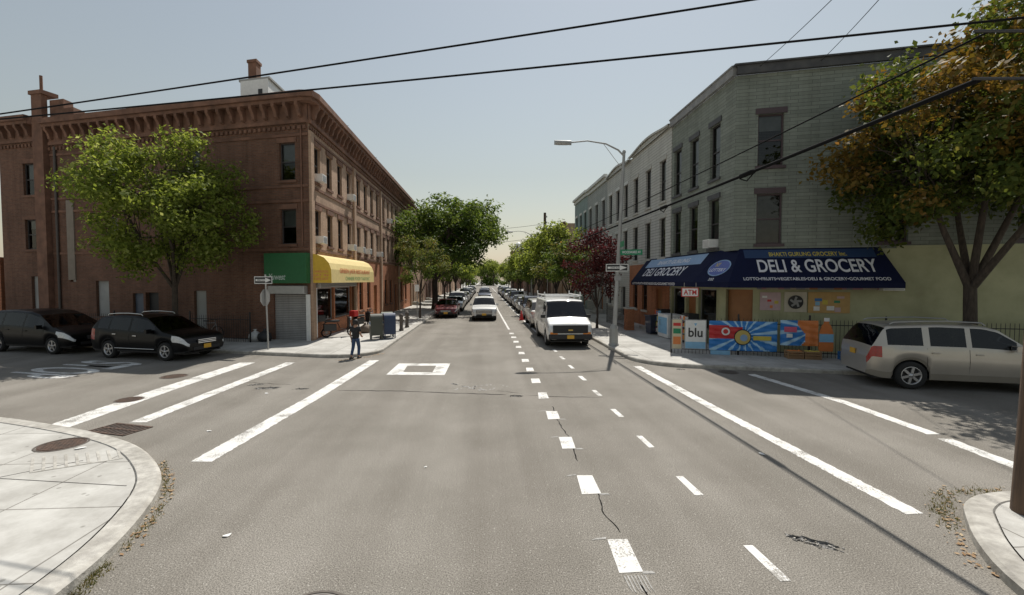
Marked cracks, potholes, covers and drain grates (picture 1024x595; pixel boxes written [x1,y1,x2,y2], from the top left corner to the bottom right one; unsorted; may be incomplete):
crack [534,395,578,461]
crack [598,493,621,533]
manhole cover [32,437,91,452]
pothole [784,533,845,553]
drain grate [88,423,153,436]
